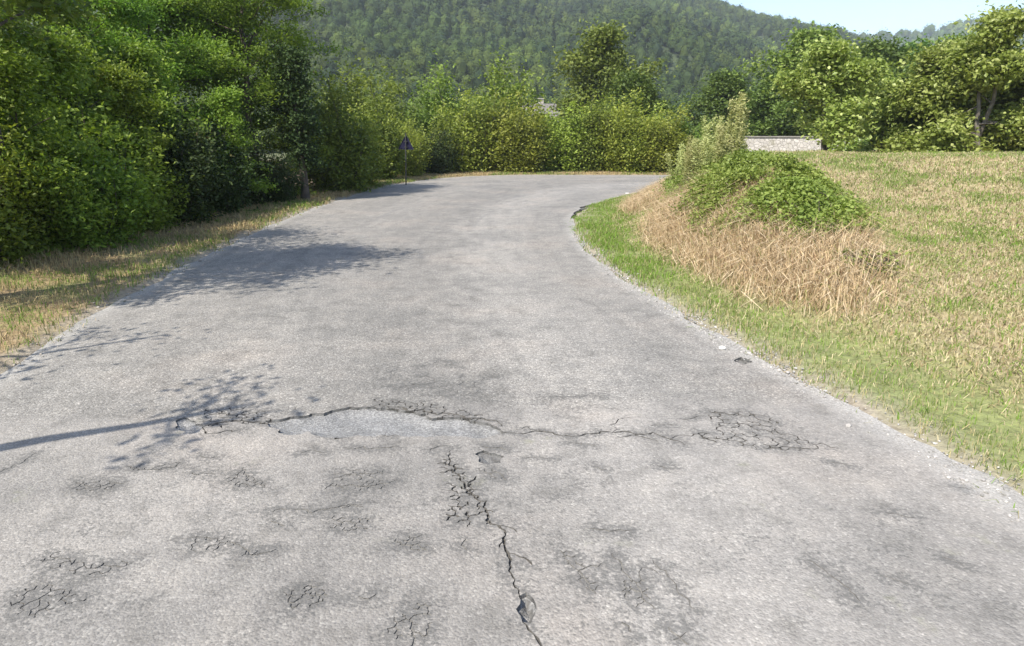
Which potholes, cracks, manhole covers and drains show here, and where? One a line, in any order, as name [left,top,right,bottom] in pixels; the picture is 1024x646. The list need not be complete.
crack [285,585,327,609]
crack [358,594,433,646]
crack [72,456,266,491]
pothole [266,407,509,439]
crack [182,470,395,556]
crack [430,446,533,597]
crack [202,408,272,434]
crack [10,551,132,617]
crack [560,550,692,632]
crack [522,622,542,646]
pothole [475,451,503,464]
